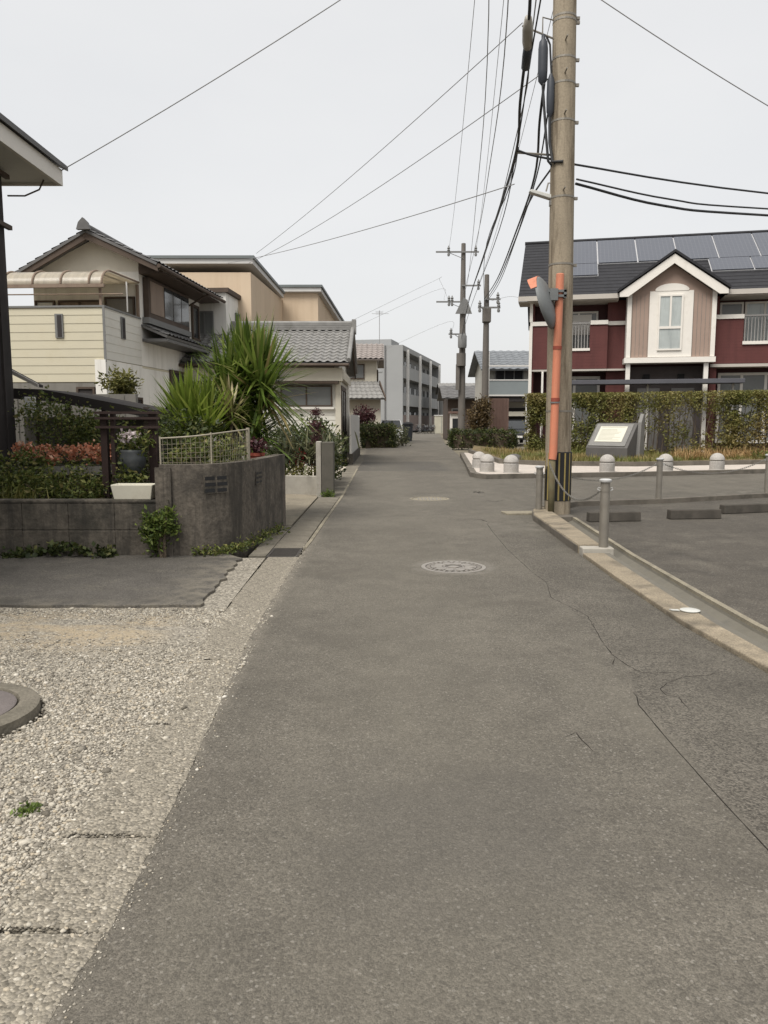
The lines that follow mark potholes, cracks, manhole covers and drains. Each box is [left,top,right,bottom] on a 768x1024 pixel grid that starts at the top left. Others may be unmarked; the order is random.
crack [478,519,714,709]
manhole cover [421,561,486,573]
manhole cover [0,683,41,739]
drain grate [266,548,303,559]
